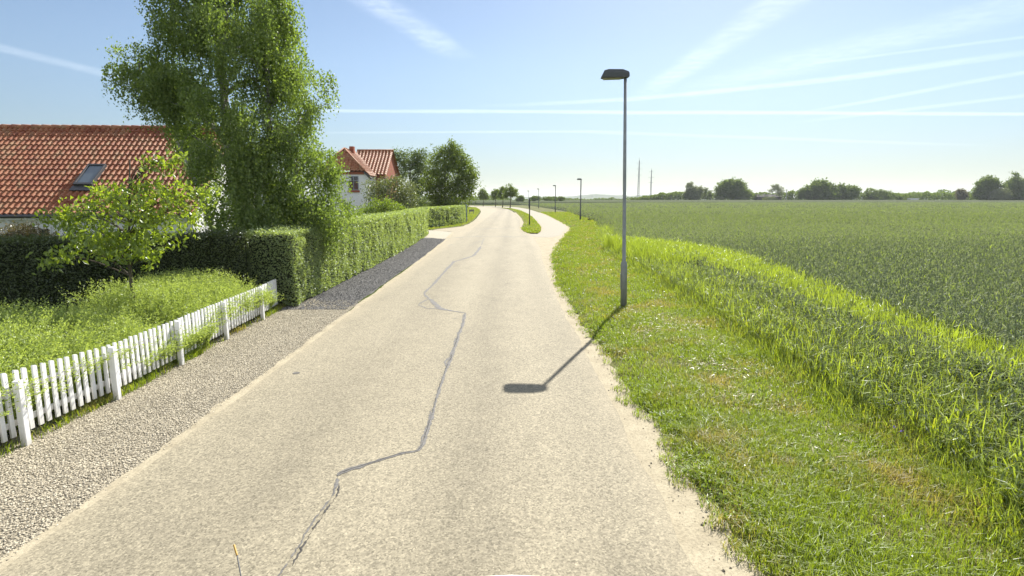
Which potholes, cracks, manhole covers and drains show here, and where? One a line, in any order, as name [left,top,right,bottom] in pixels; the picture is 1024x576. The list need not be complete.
crack [278,228,529,576]
